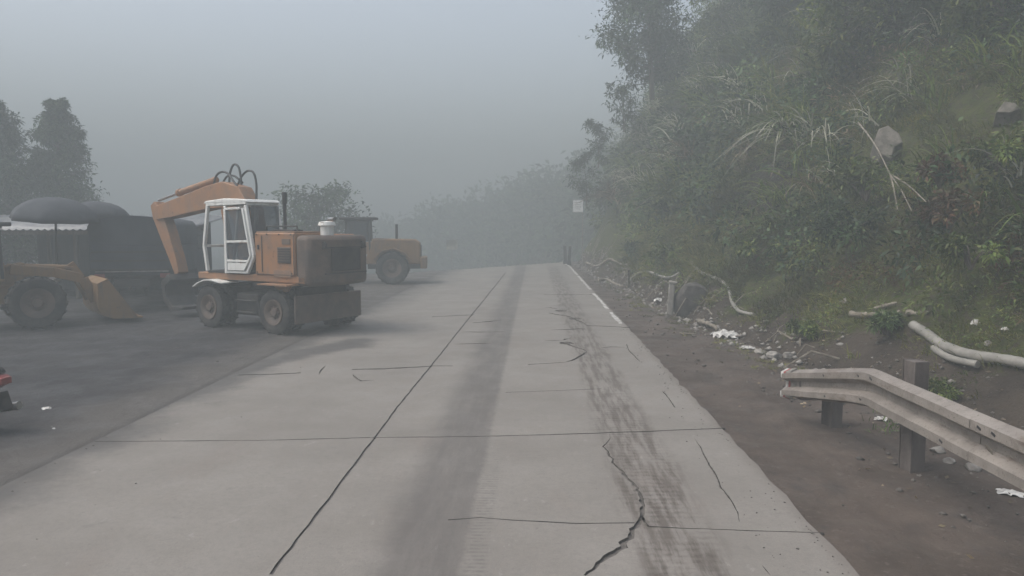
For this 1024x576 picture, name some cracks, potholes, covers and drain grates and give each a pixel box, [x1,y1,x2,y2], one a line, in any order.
crack [694,438,739,519]
crack [584,439,652,575]
crack [548,307,606,362]
